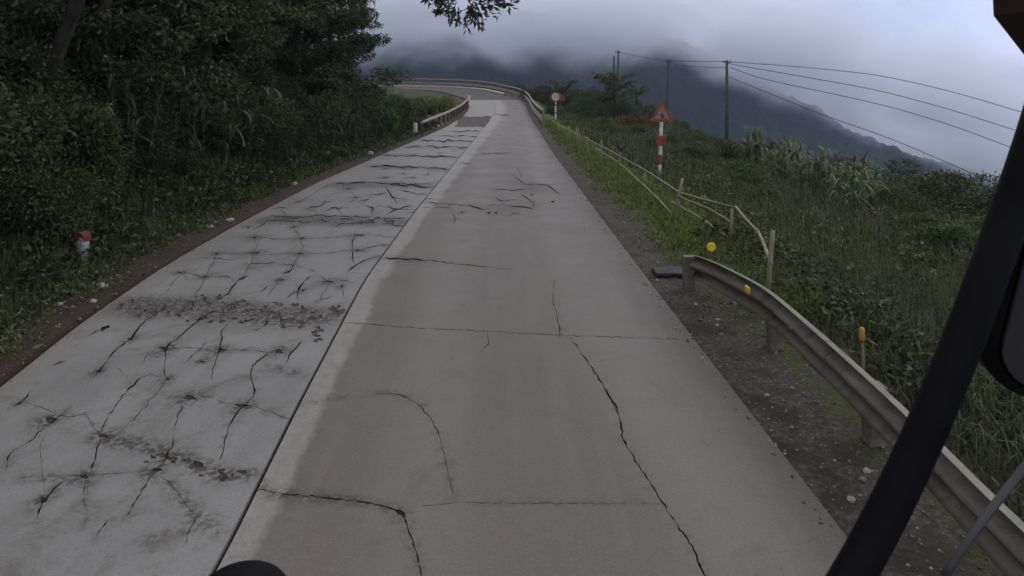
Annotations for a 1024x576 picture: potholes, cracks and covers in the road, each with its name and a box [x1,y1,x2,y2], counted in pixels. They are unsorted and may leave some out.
crack [261,489,422,575]
pothole [144,452,247,482]
crack [553,290,705,576]
crack [6,130,559,542]
pothole [119,294,345,342]
